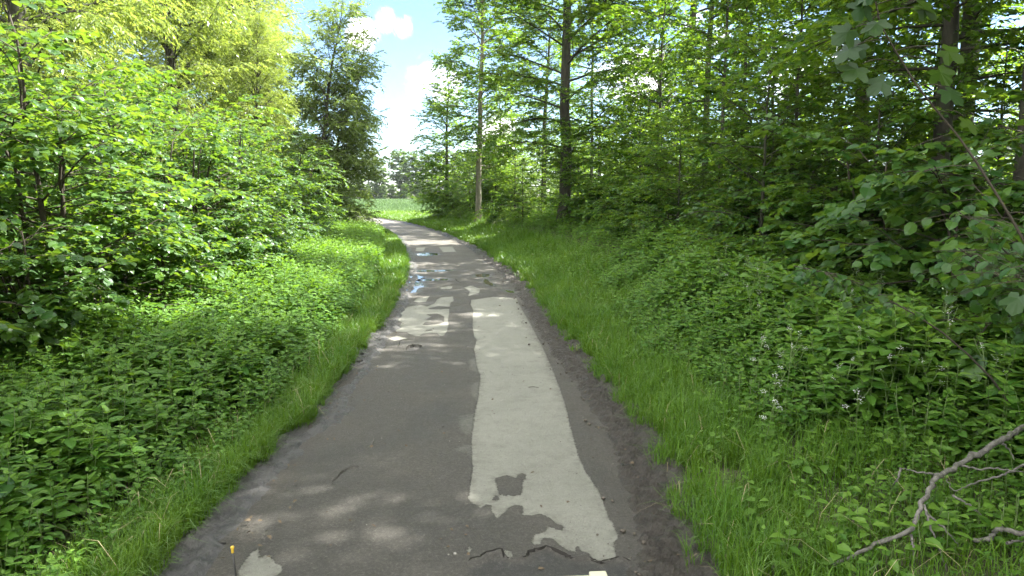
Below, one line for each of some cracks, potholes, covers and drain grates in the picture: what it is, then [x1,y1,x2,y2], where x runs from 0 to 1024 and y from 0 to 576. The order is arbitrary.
pothole [402,344,425,352]
crack [454,541,643,571]
